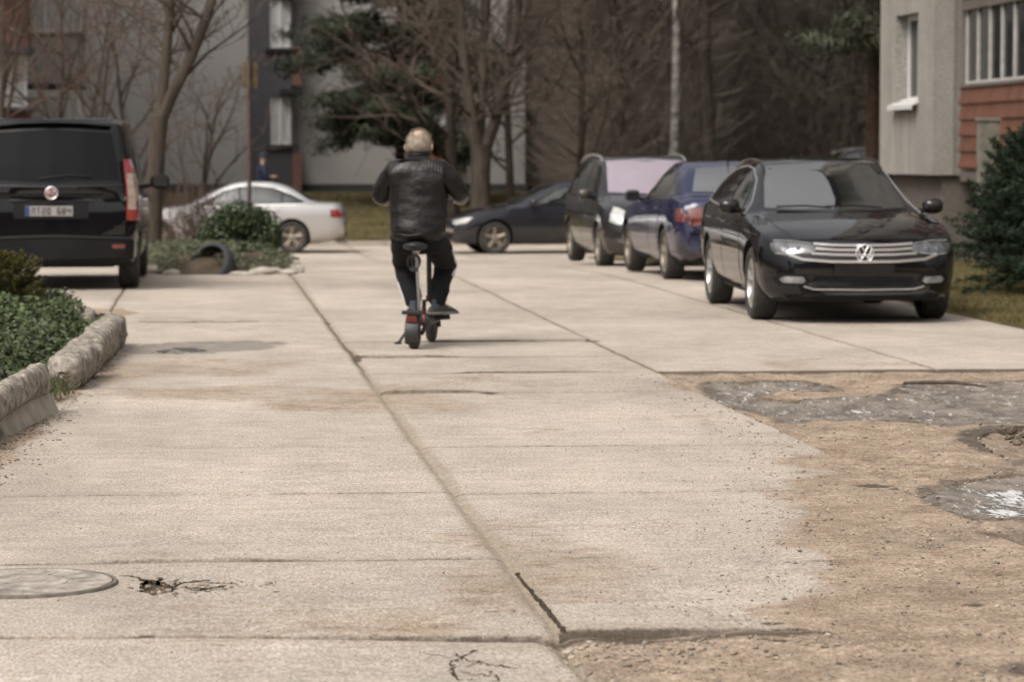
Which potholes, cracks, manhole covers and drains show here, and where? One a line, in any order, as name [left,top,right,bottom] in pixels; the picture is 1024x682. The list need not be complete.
manhole cover [0,568,118,599]
crack [423,650,517,682]
pothole [920,476,1024,518]
crack [125,575,238,592]
pothole [974,425,1024,458]
